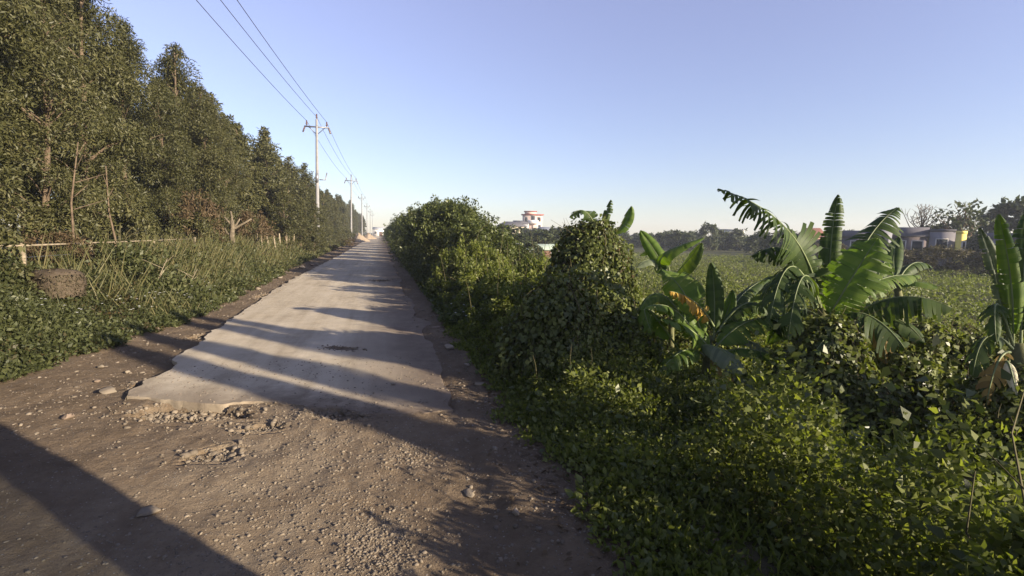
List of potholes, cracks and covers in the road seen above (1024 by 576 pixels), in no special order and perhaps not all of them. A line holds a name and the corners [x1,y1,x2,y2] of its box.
pothole [317,344,367,352]
pothole [160,439,264,470]
pothole [224,418,297,436]
pothole [78,400,308,431]
